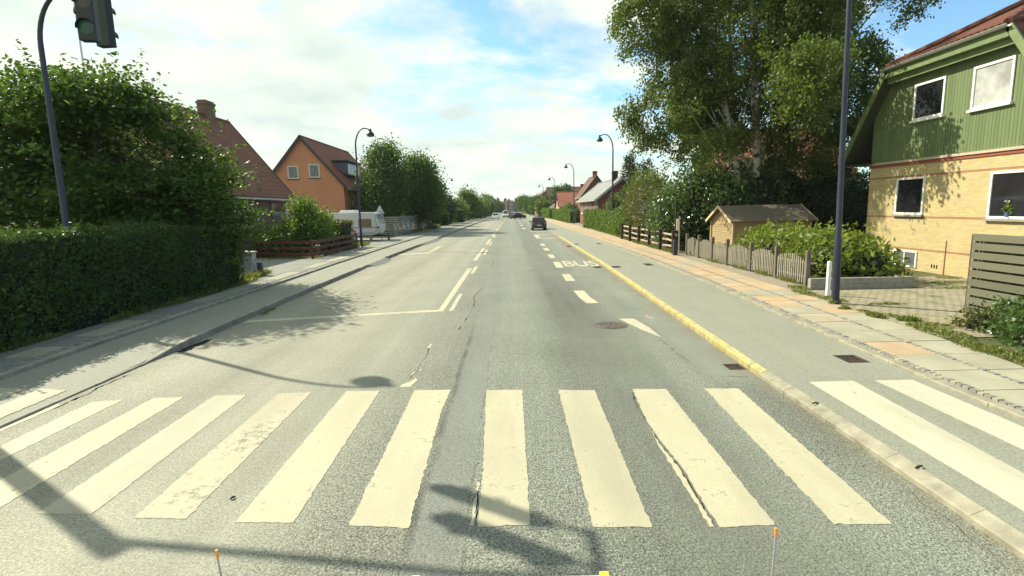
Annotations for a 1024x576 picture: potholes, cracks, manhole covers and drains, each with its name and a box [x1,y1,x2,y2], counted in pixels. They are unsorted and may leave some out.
crack [54,375,128,409]
drain grate [835,355,870,363]
crack [633,394,716,527]
manhole cover [594,321,628,329]
pothole [177,339,212,353]
